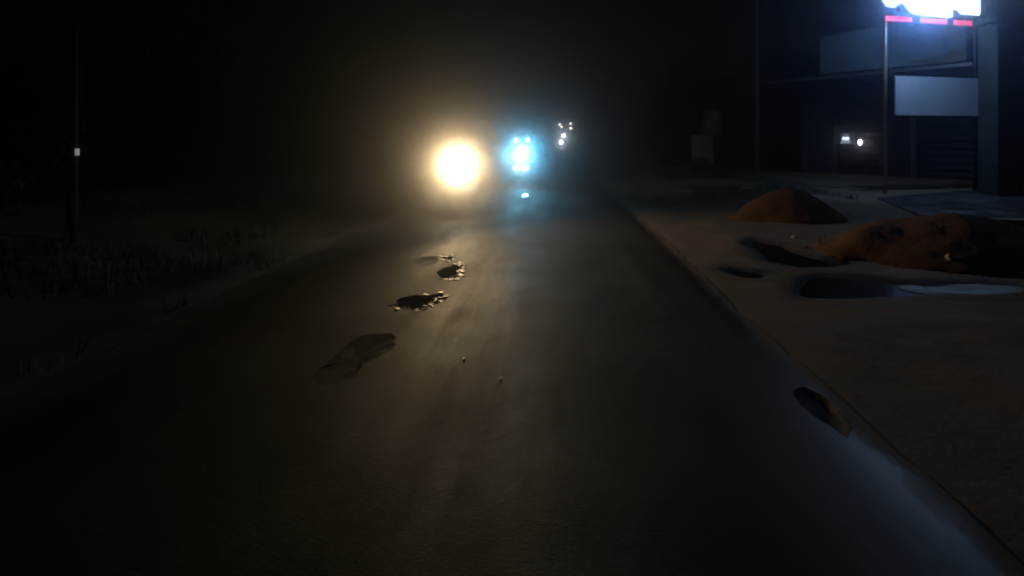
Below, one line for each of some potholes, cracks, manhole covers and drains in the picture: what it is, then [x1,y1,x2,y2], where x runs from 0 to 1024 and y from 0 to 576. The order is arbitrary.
pothole [410,256,439,267]
pothole [312,333,396,386]
pothole [436,262,467,281]
pothole [794,386,852,438]
pothole [388,292,449,311]
